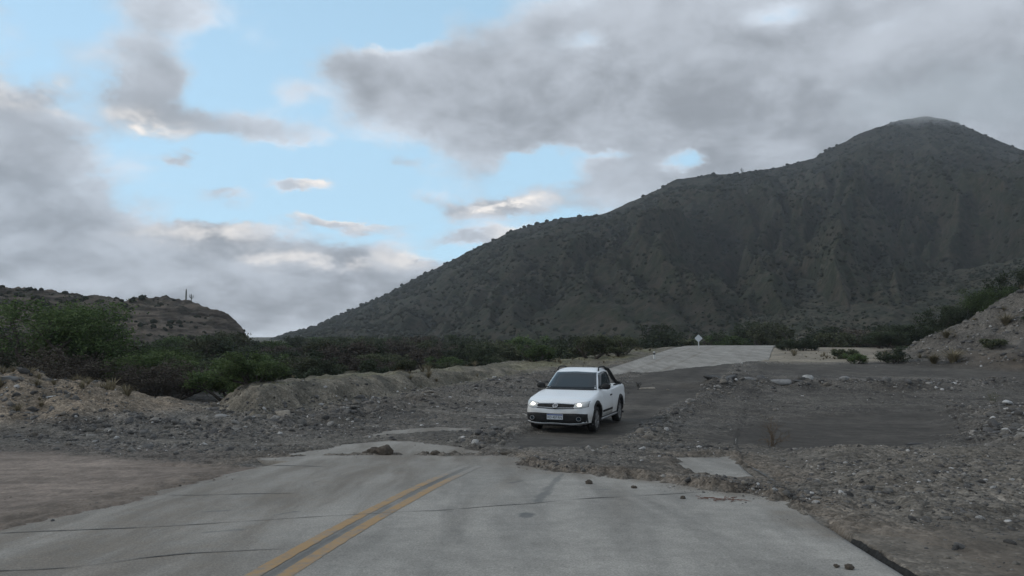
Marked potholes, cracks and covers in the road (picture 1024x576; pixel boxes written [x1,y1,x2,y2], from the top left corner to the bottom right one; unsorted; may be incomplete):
crack [5,491,713,533]
